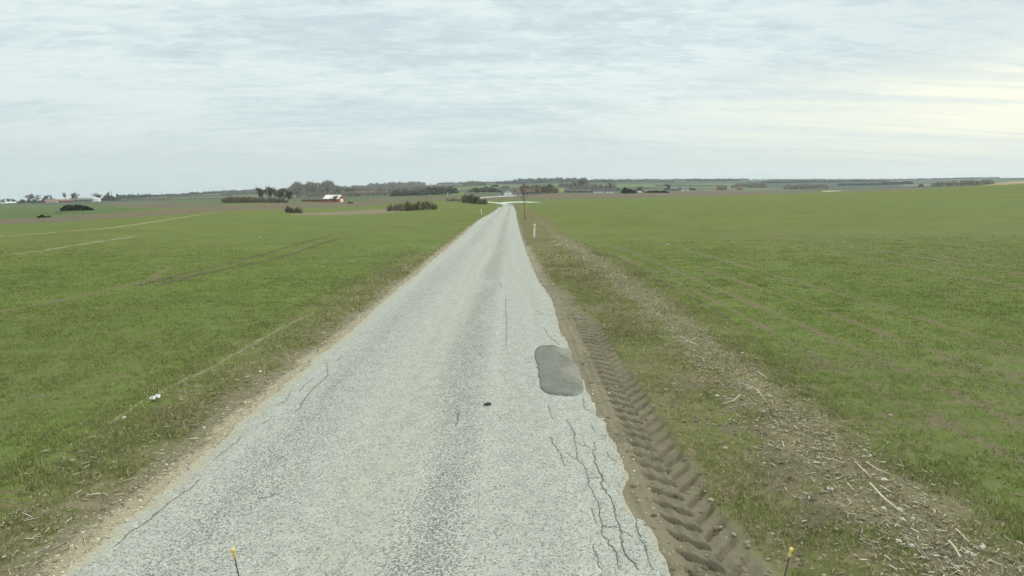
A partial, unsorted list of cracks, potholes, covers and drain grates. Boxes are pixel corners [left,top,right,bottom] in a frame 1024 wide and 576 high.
crack [262,355,342,424]
crack [548,400,651,569]
